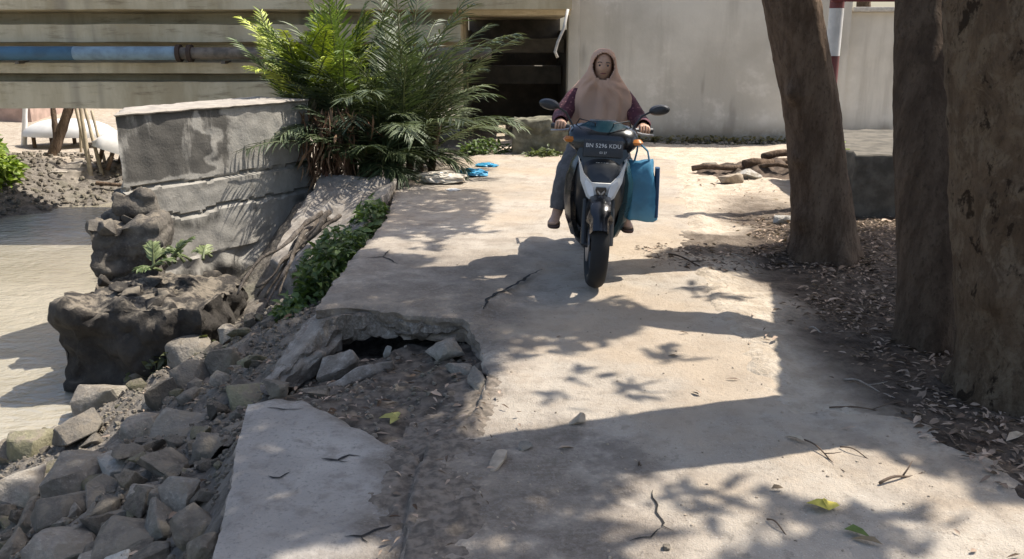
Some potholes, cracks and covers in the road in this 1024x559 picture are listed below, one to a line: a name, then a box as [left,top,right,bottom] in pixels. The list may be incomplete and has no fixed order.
crack [483,269,542,309]
crack [345,525,391,543]
pothole [211,339,484,462]
crack [323,454,358,462]
crack [629,490,671,541]
